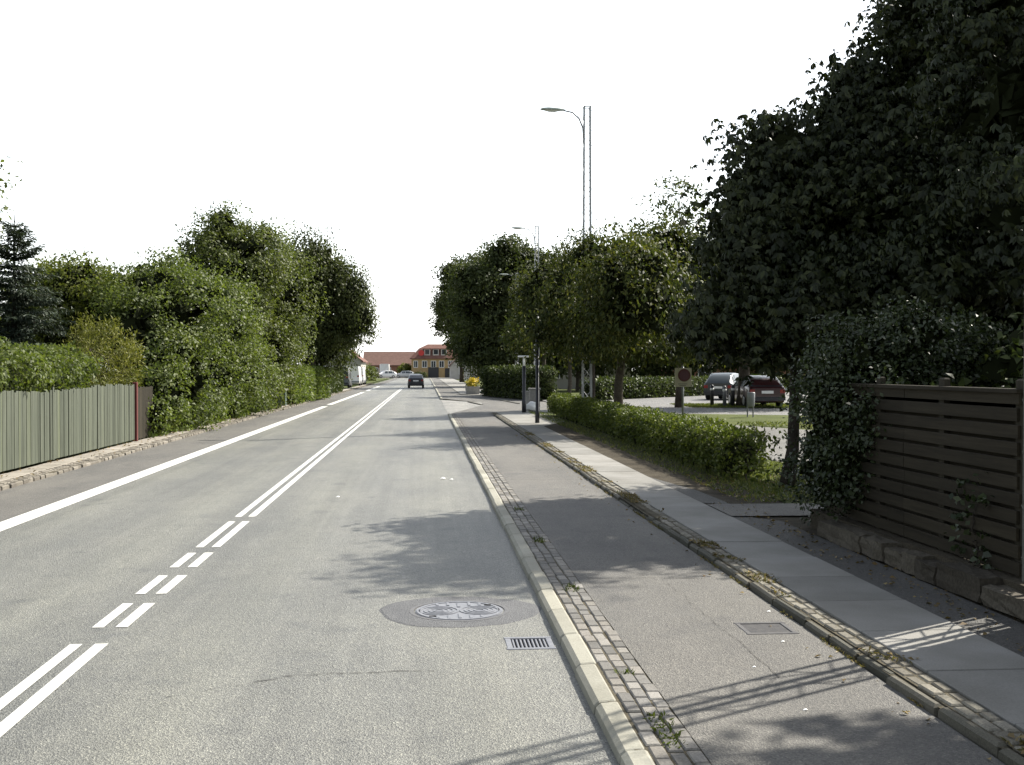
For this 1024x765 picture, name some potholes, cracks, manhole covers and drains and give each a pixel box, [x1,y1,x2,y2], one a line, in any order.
drain grate [503,636,556,650]
manhole cover [379,597,542,628]
